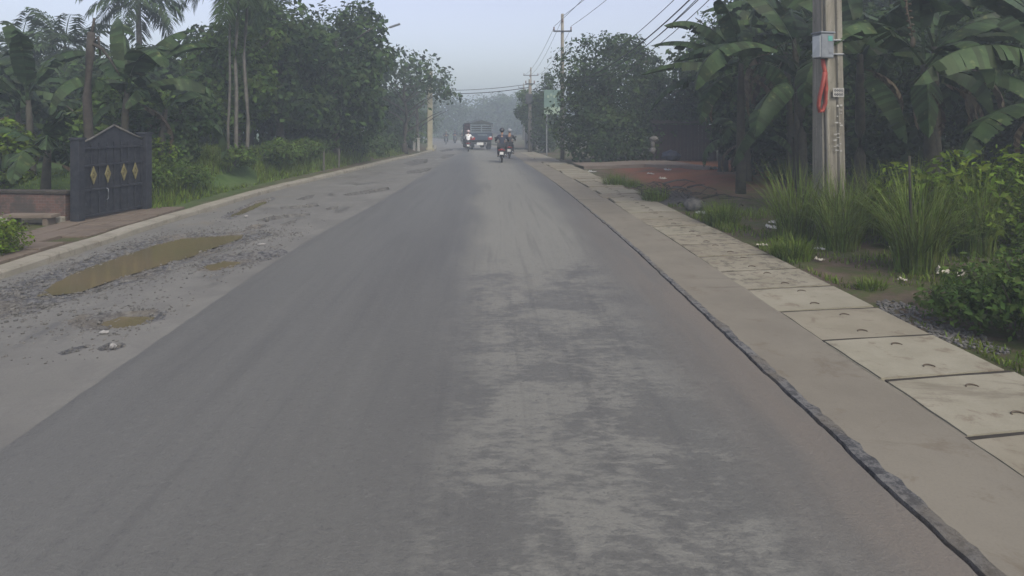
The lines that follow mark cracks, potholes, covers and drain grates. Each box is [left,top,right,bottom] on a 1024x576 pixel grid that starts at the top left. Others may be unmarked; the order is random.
pothole [68,309,167,331]
pothole [343,187,390,196]
pothole [0,231,277,318]
pothole [58,344,91,356]
pothole [96,342,126,351]
pothole [220,197,275,220]
